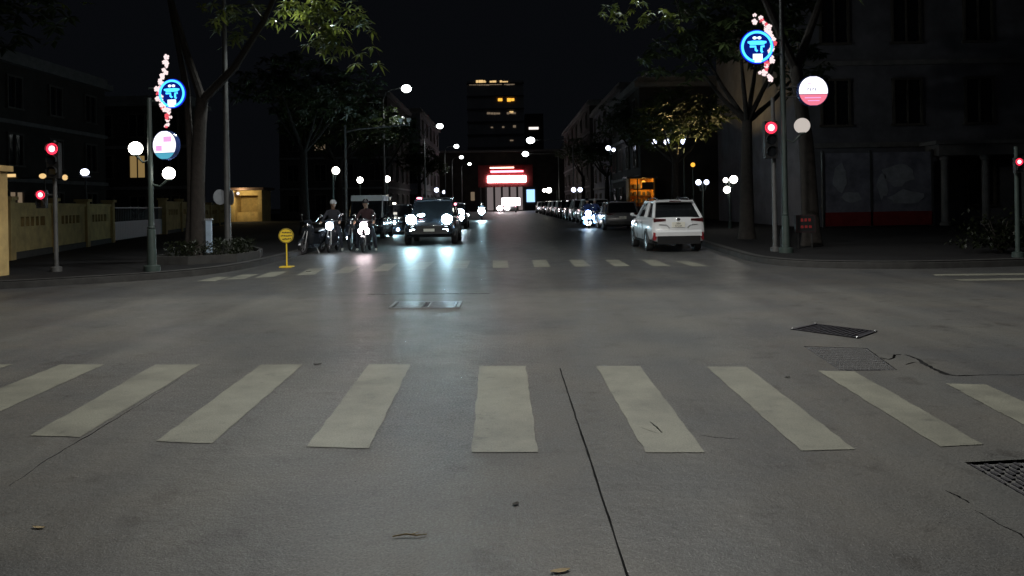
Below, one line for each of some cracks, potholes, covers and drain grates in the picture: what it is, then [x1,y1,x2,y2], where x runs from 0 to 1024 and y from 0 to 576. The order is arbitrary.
drain grate [791,323,878,357]
manhole cover [806,347,896,371]
crack [880,354,1024,376]
crack [945,490,1024,538]
crack [9,381,176,486]
